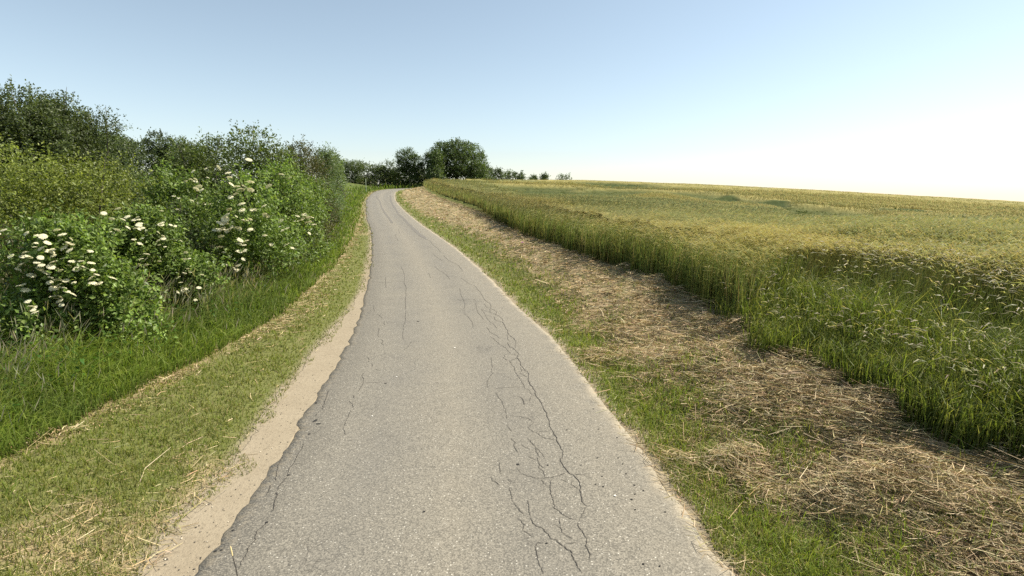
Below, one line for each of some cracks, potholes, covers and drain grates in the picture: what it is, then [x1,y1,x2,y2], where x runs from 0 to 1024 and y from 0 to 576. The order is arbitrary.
crack [428,249,591,572]
crack [240,444,304,566]
